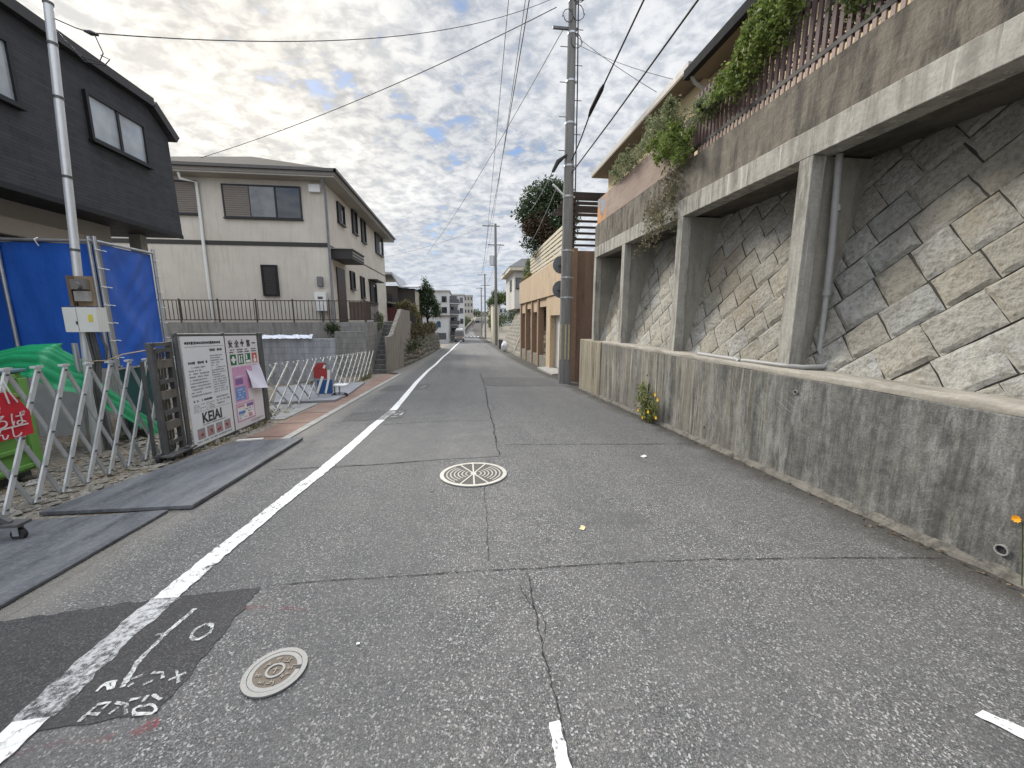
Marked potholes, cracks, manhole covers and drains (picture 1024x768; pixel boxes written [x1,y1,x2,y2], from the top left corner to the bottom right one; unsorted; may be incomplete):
crack [519,570,573,768]
manhole cover [240,647,308,699]
manhole cover [440,462,507,487]
